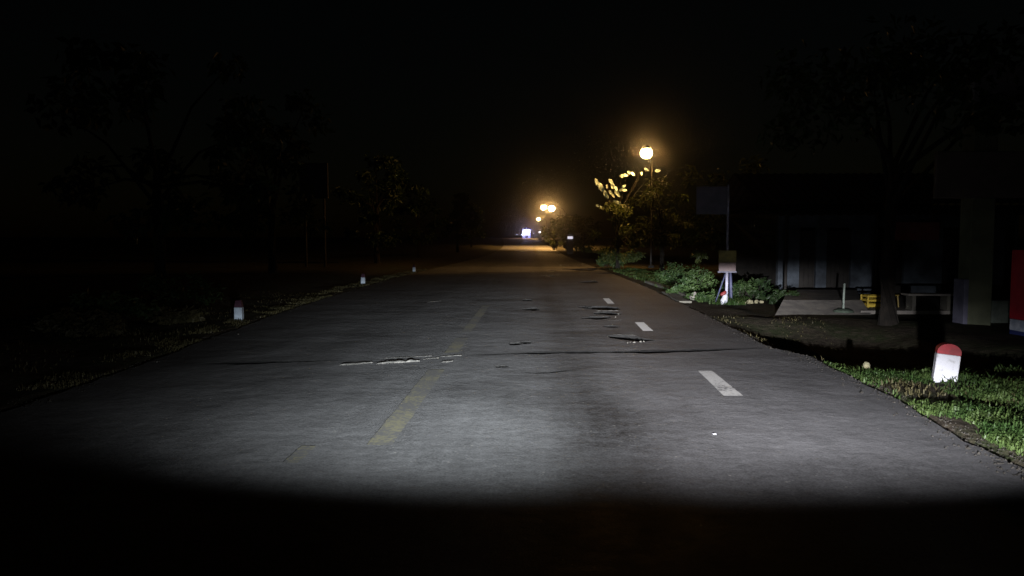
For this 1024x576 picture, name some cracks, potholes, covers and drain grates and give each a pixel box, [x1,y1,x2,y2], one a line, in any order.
crack [477,348,760,373]
